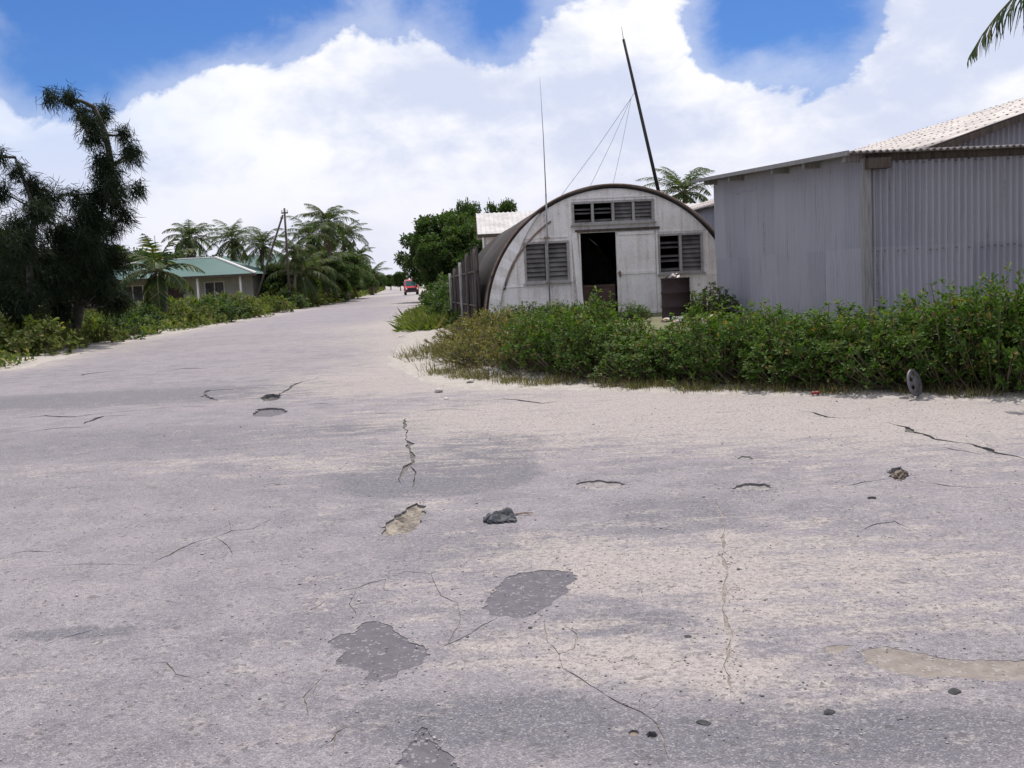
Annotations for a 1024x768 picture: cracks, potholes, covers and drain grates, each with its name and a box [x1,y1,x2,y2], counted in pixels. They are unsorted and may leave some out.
crack [13,520,269,566]
crack [302,726,349,760]
crack [715,502,733,695]
crack [302,569,497,717]
crack [800,410,1024,459]
crack [23,387,261,433]
crack [544,620,669,760]
pothole [252,408,287,417]
pothole [381,503,426,537]
crack [398,418,416,486]
